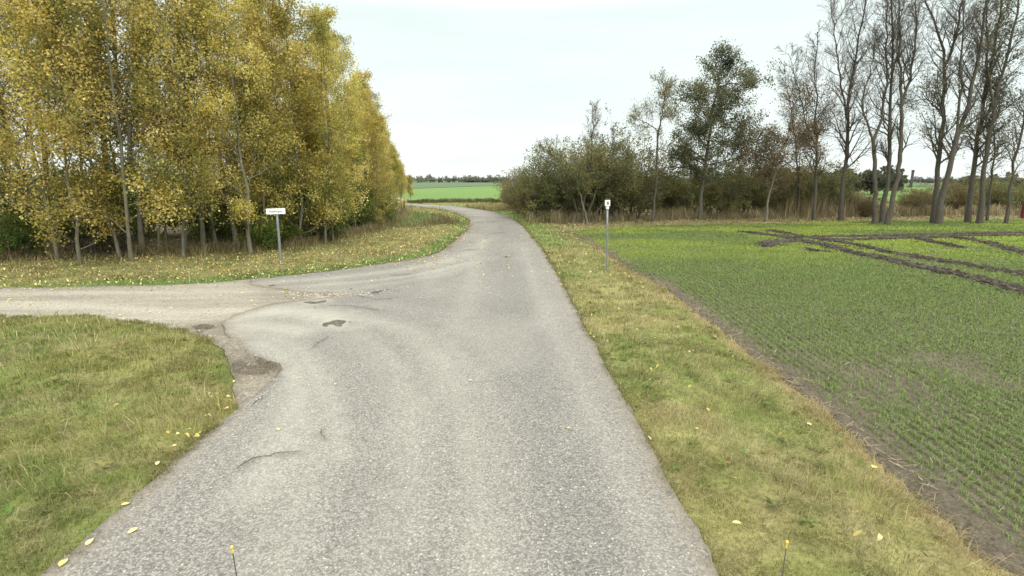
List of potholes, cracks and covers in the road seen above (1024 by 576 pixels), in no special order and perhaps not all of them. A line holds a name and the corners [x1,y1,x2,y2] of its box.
pothole [211,338,283,408]
